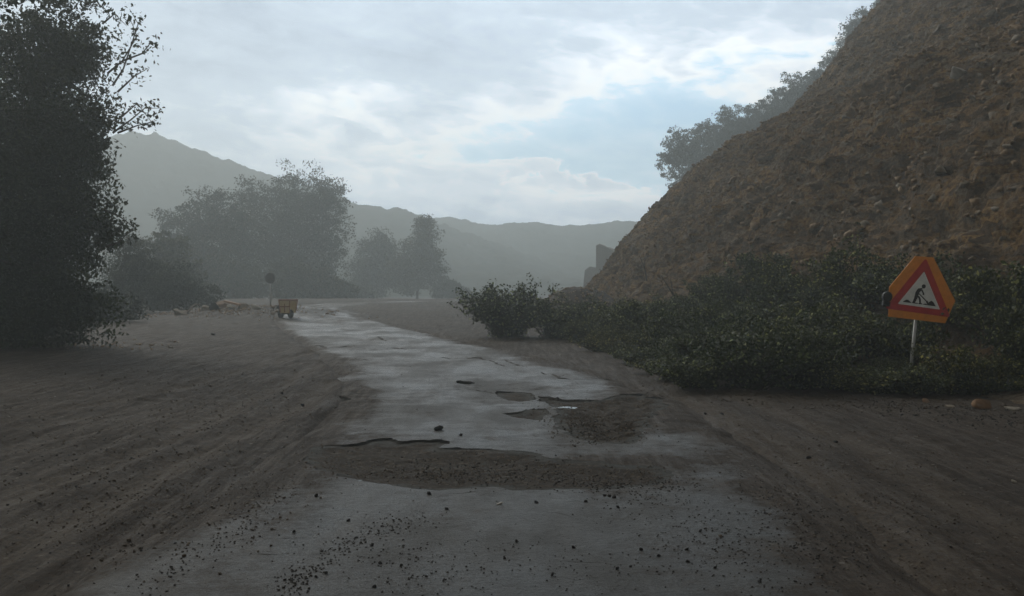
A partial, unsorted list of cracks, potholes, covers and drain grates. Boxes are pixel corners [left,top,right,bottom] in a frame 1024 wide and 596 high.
pothole [502,408,550,420]
pothole [302,438,674,491]
pothole [495,391,536,402]
pothole [536,393,669,445]
